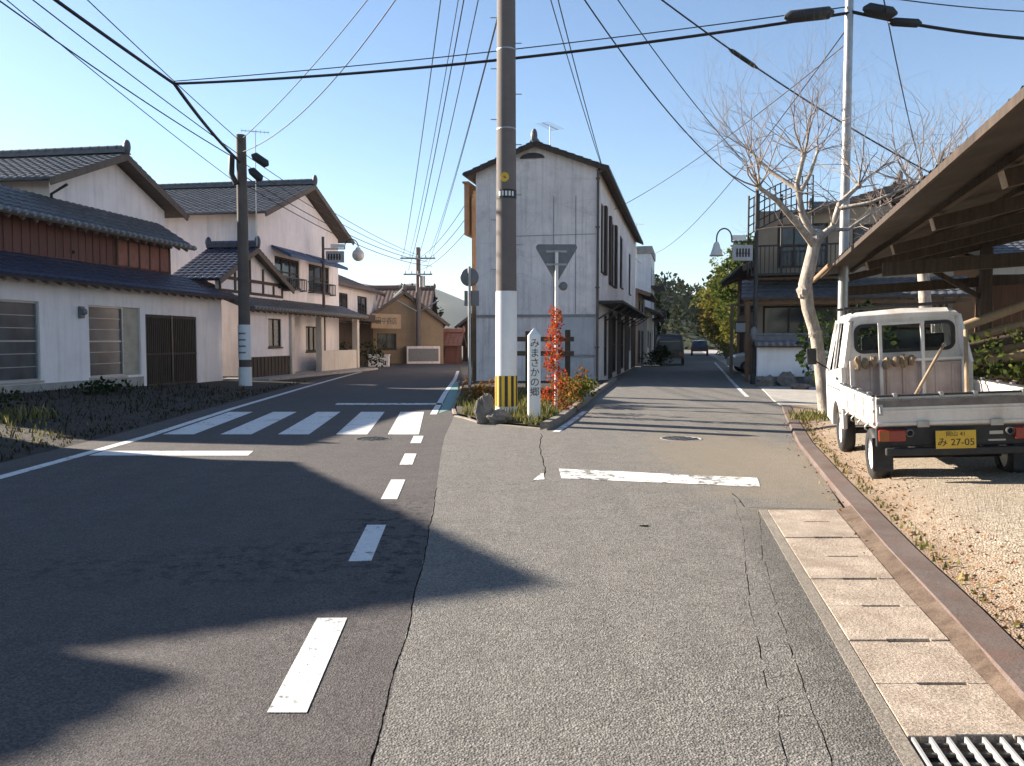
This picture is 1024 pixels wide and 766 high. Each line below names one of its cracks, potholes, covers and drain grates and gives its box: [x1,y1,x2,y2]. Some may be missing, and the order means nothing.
crack [733,494,833,766]
drain grate [911,737,1024,766]
